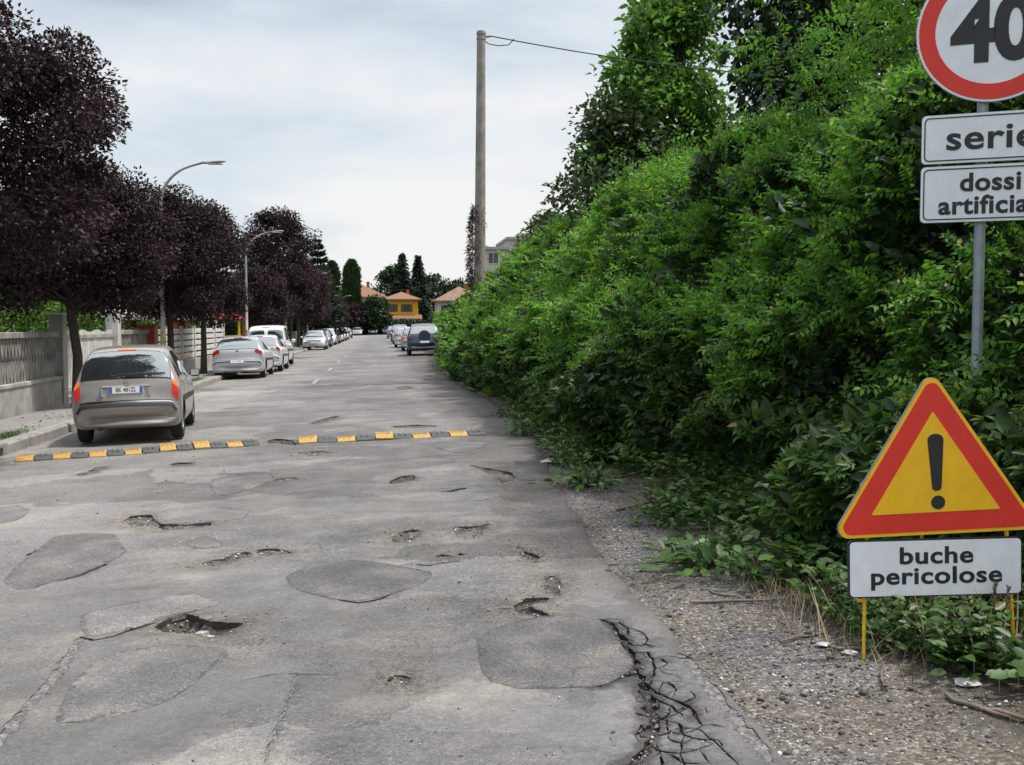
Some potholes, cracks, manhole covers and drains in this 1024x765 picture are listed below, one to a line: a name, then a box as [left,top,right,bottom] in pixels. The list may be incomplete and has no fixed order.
pothole [452,524,488,535]
pothole [545,577,562,596]
pothole [470,465,514,483]
pothole [387,675,411,686]
pothole [125,515,210,530]
pothole [390,475,415,484]
crack [601,619,773,765]
pothole [202,552,252,566]
pothole [392,530,420,542]
crack [0,623,155,748]
pothole [514,598,549,617]
pothole [156,614,242,637]
